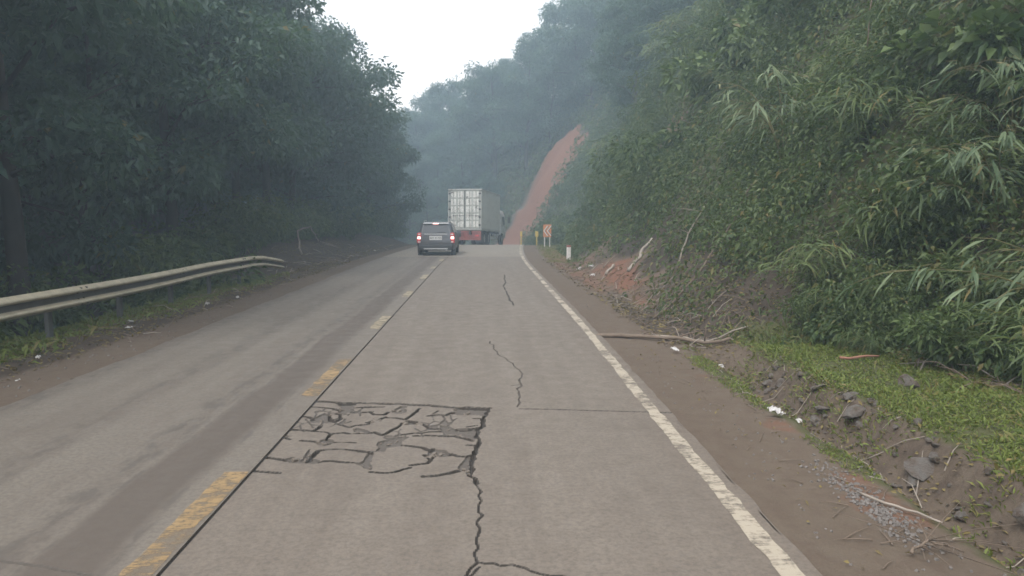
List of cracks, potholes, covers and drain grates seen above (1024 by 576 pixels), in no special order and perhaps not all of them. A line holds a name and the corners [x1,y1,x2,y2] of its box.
crack [255,341,567,576]
crack [502,275,514,305]
